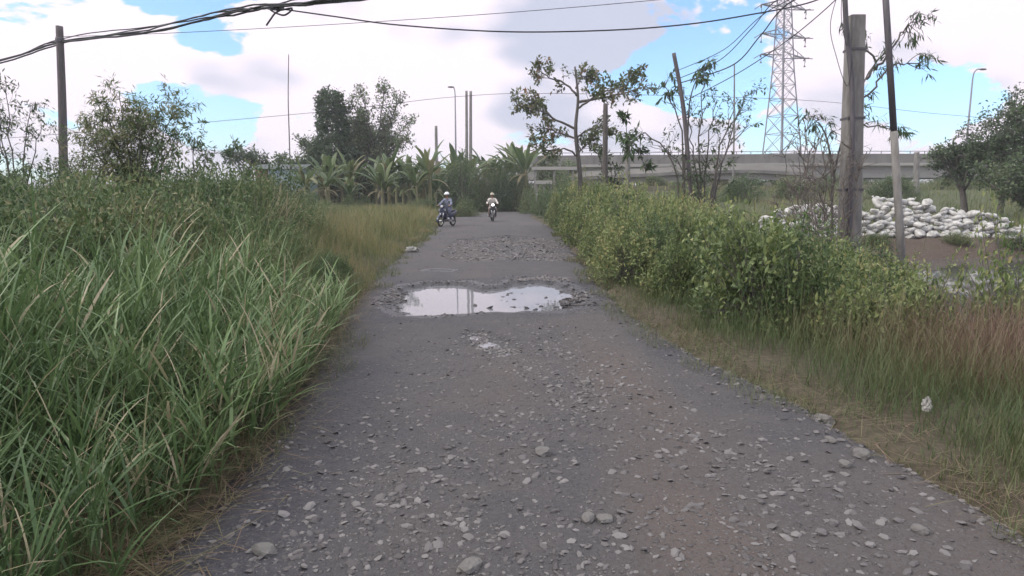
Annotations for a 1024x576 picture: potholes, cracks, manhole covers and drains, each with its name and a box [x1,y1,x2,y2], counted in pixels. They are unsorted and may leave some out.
pothole [453,326,532,359]
pothole [439,235,579,262]
pothole [373,278,602,318]
